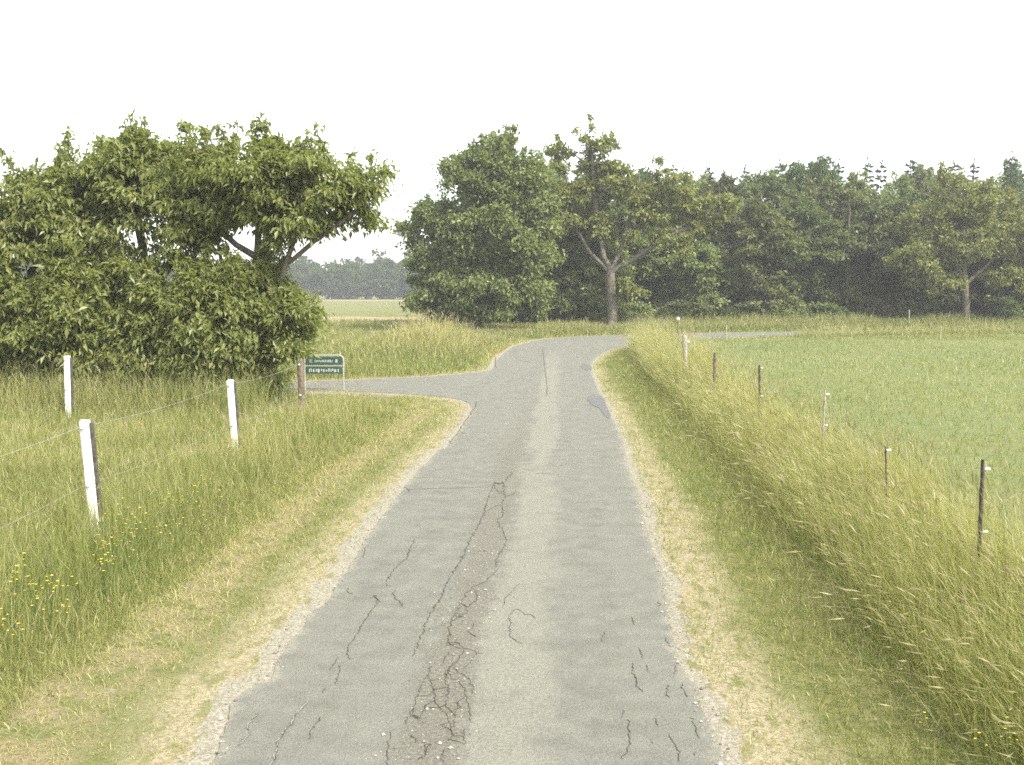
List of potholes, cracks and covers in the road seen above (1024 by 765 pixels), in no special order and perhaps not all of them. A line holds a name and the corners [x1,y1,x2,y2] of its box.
crack [405,474,534,761]
crack [239,540,415,765]
